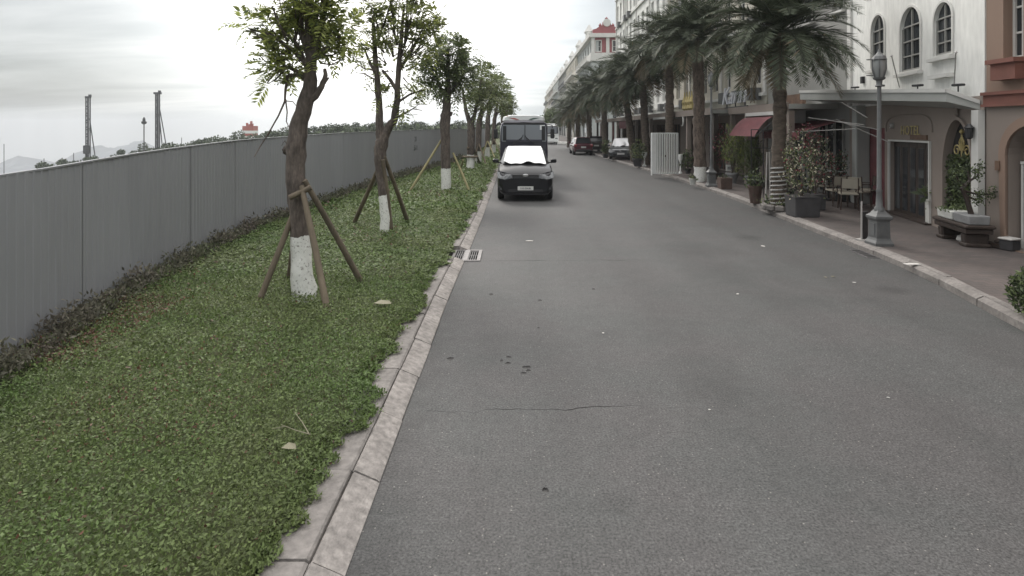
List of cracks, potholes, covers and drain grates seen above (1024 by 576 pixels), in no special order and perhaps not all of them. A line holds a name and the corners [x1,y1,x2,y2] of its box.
drain grate [452,250,483,262]
